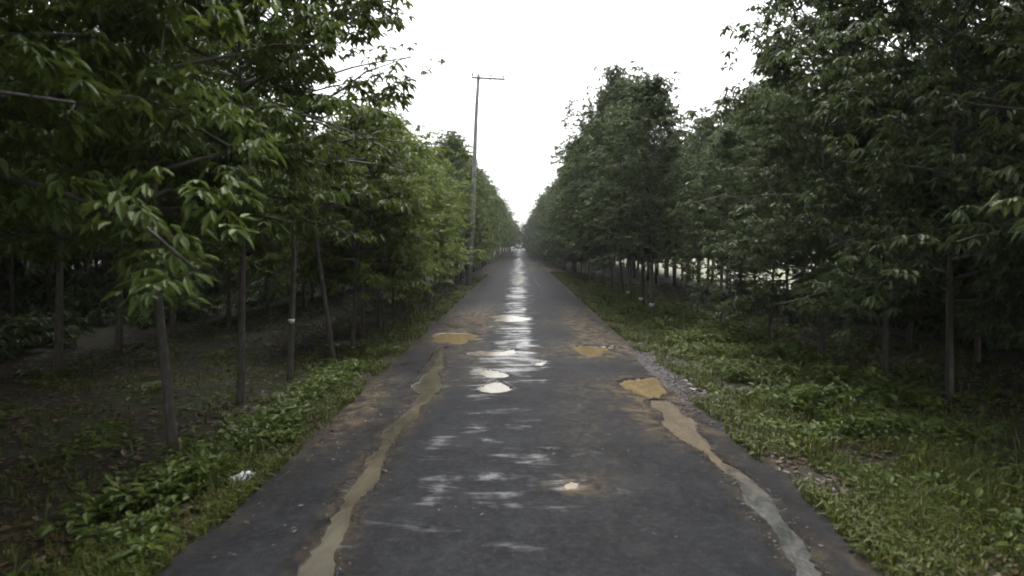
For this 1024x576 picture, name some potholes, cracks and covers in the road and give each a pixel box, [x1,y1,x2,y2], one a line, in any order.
pothole [615,376,668,400]
pothole [431,331,480,345]
pothole [569,345,614,357]
